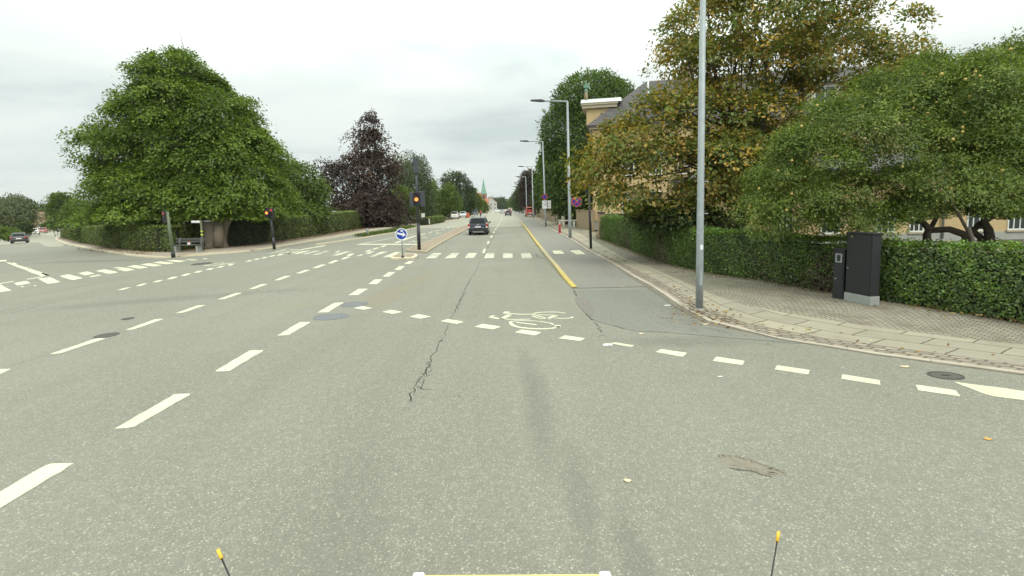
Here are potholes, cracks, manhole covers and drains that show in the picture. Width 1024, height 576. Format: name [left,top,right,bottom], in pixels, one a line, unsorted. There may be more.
manhole cover [926,371,965,380]
crack [408,263,480,402]
